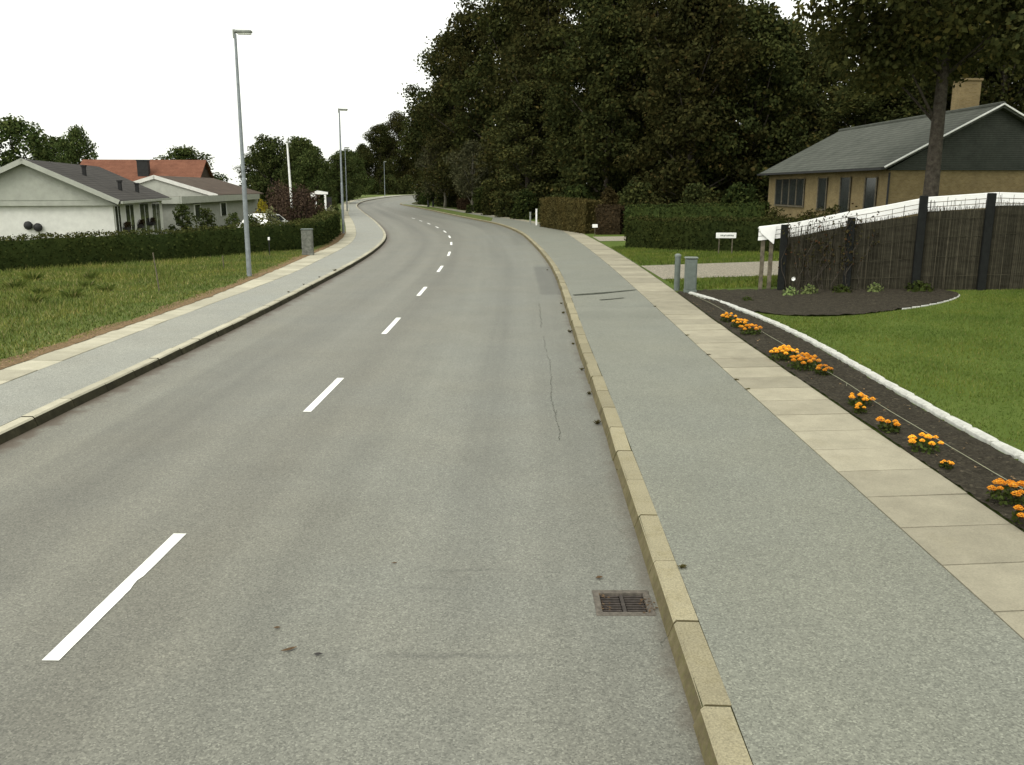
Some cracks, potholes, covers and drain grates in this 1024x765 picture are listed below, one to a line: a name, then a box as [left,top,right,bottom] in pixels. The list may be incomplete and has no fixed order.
crack [539,304,561,440]
drain grate [592,590,658,616]
